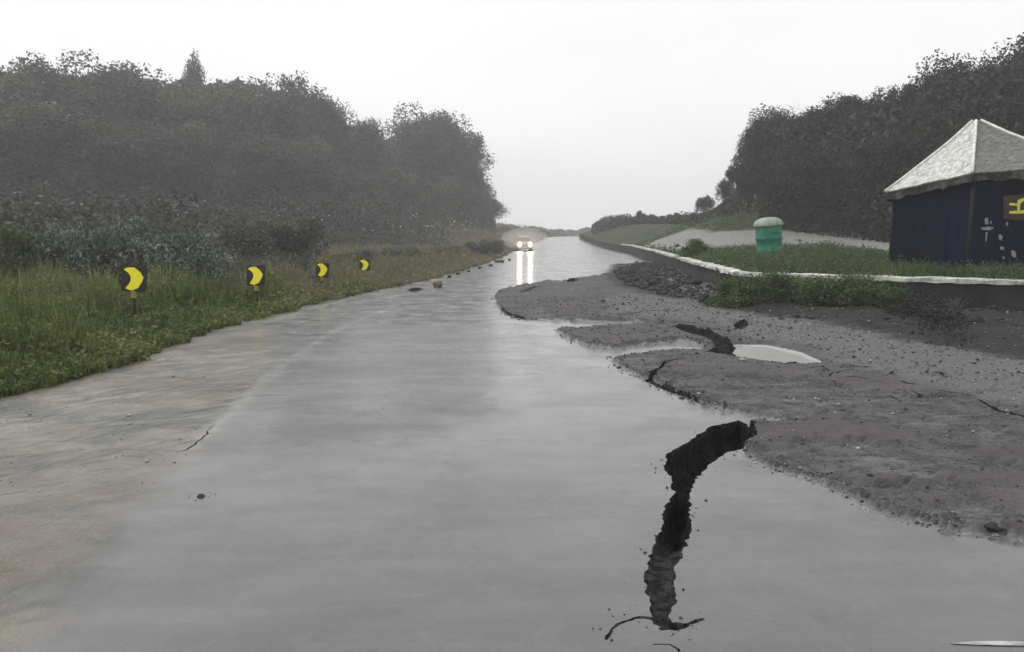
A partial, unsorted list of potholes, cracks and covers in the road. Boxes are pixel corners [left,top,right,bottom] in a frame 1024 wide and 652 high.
crack [178,426,213,452]
crack [605,310,1022,652]
